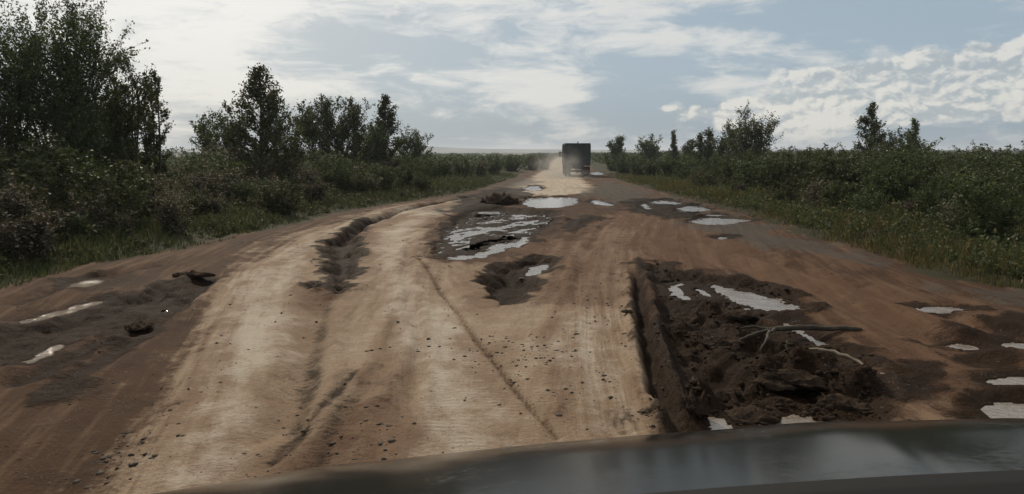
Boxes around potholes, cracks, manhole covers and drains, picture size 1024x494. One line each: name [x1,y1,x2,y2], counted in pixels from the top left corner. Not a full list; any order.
pothole [59,272,108,289]
pothole [474,254,560,305]
pothole [316,217,383,294]
pothole [977,373,1024,386]
pothole [520,195,582,208]
pothole [429,206,562,260]
pothole [672,203,711,213]
pothole [640,260,893,432]
pothole [684,214,753,226]
pothole [909,301,973,315]
pothole [996,340,1024,349]
pothole [940,336,1006,353]
